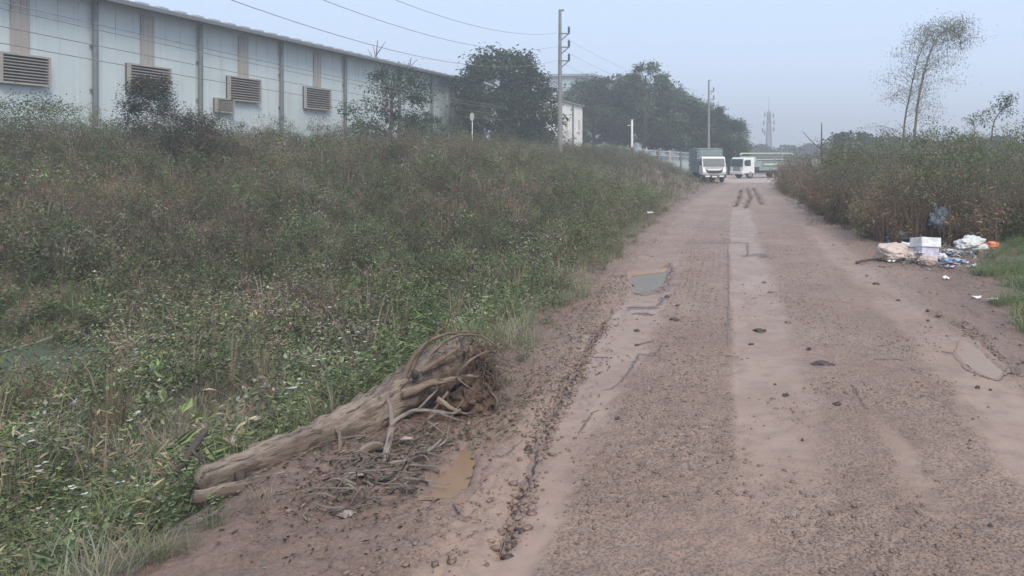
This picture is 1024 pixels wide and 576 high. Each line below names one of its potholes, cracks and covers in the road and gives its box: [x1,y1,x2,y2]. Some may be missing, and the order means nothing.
crack [591,340,663,391]
crack [578,410,599,434]
pothole [415,441,490,505]
pothole [626,268,671,294]
pothole [953,338,1010,381]
